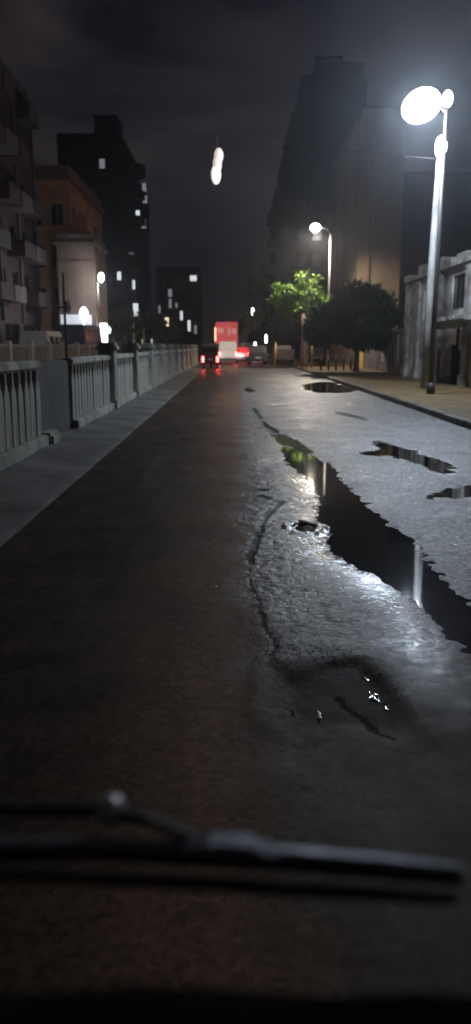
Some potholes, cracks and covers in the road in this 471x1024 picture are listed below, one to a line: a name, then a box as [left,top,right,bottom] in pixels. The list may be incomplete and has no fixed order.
pothole [255,655,444,755]
pothole [283,519,325,535]
crack [245,499,319,656]
